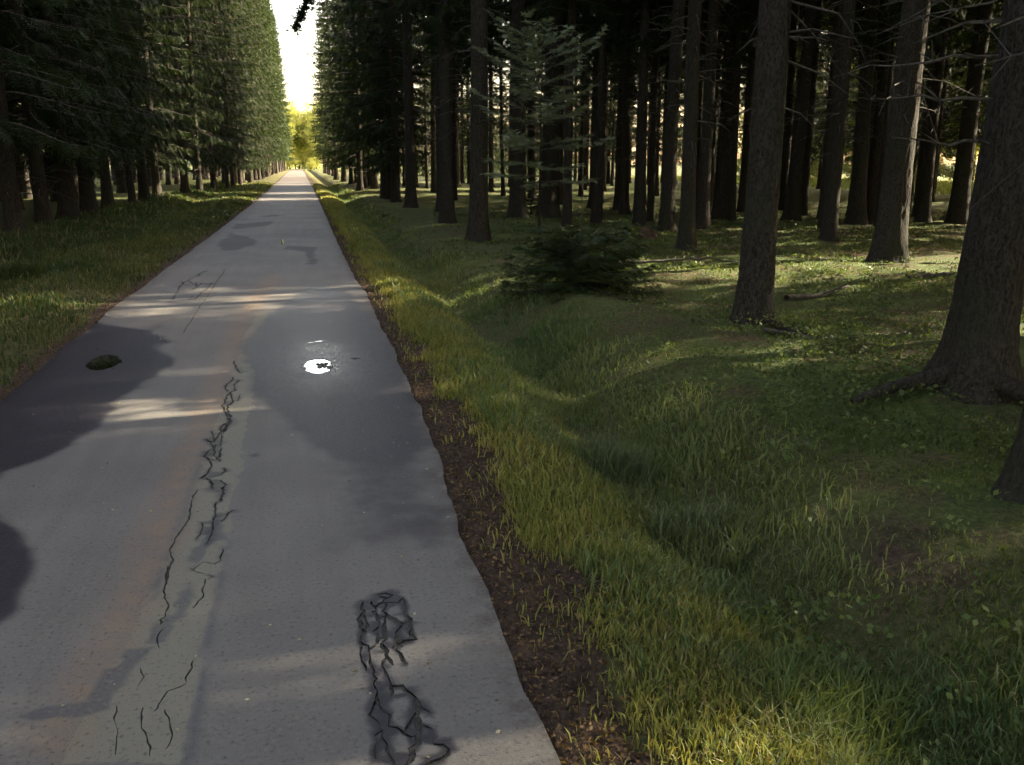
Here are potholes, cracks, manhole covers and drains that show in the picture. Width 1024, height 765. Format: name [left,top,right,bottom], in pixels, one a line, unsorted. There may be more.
pothole [85,355,122,369]
crack [356,593,450,765]
crack [140,662,193,756]
crack [156,361,241,648]
